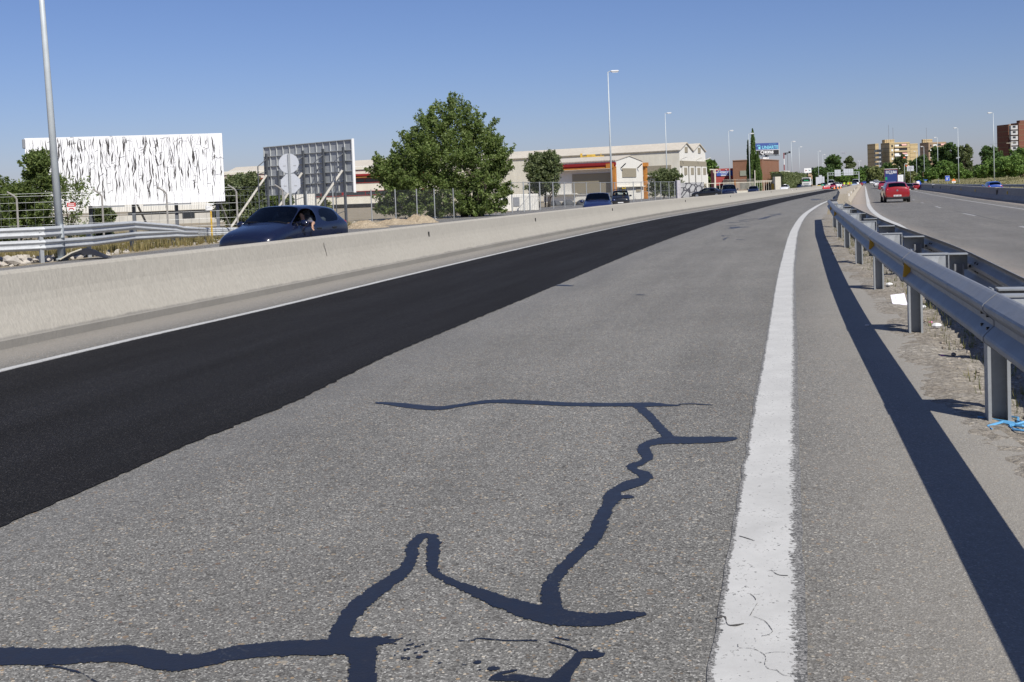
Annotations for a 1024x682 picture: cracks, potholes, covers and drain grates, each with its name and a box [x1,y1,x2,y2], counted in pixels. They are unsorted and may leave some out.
crack [715,593,788,676]
